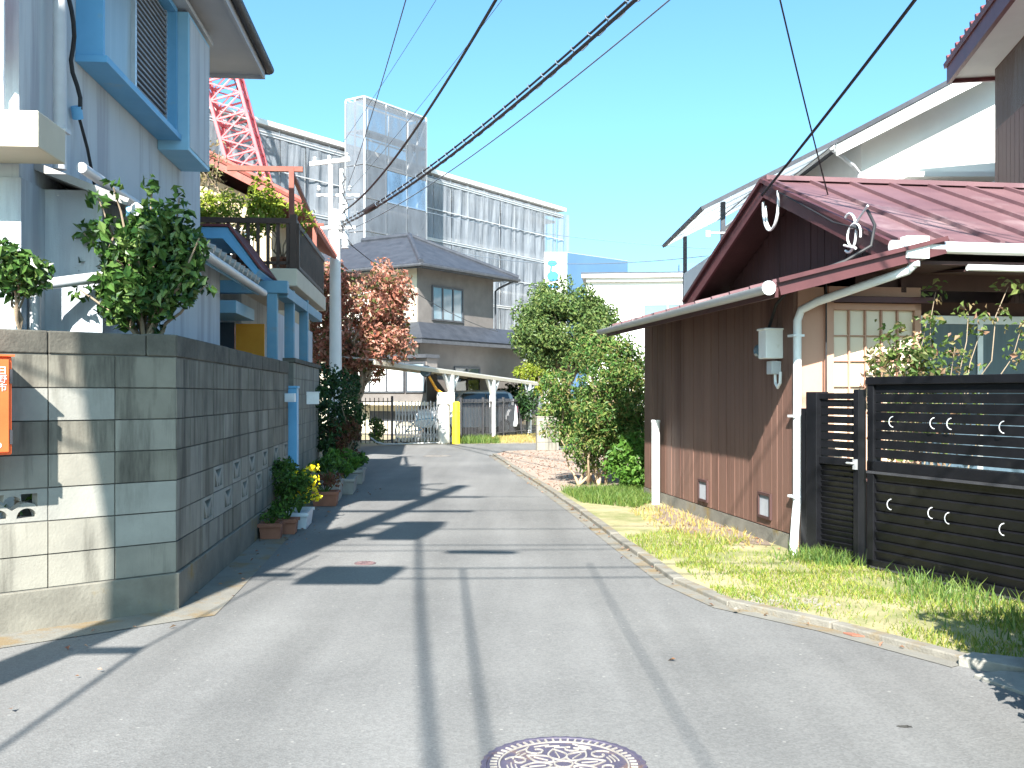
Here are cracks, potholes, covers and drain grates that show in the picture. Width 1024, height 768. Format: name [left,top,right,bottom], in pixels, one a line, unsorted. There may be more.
manhole cover [480,736,648,768]
